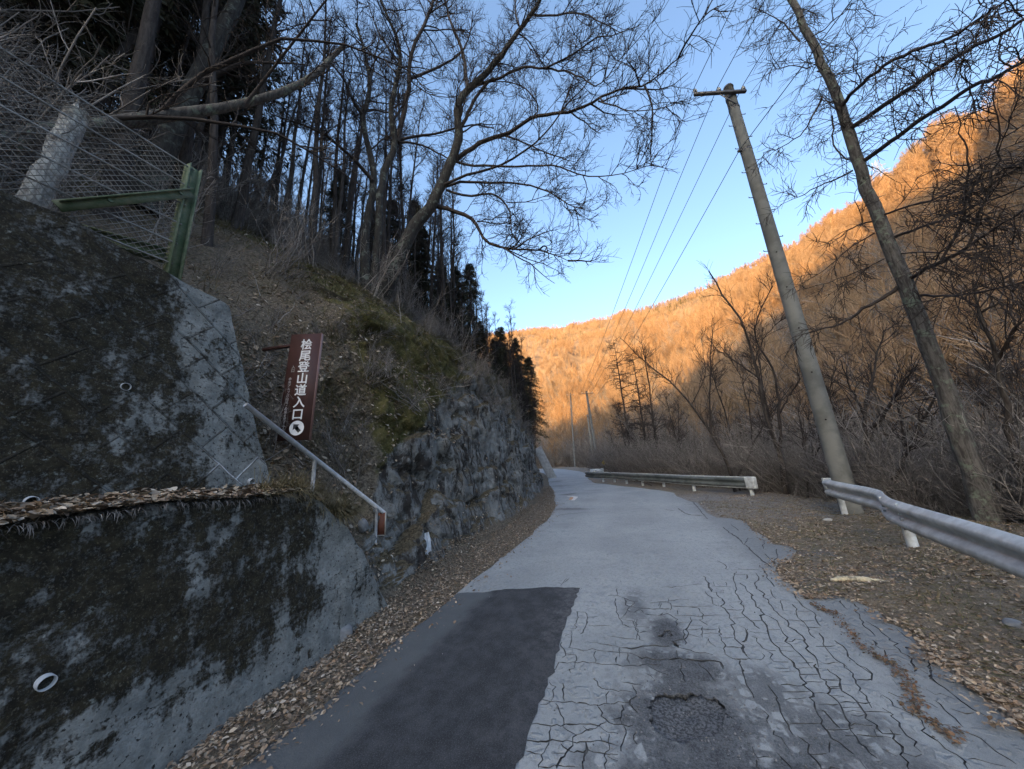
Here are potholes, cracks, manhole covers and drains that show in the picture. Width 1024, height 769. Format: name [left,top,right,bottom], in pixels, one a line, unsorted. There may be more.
pothole [647,691,732,744]
crack [527,502,1016,769]
